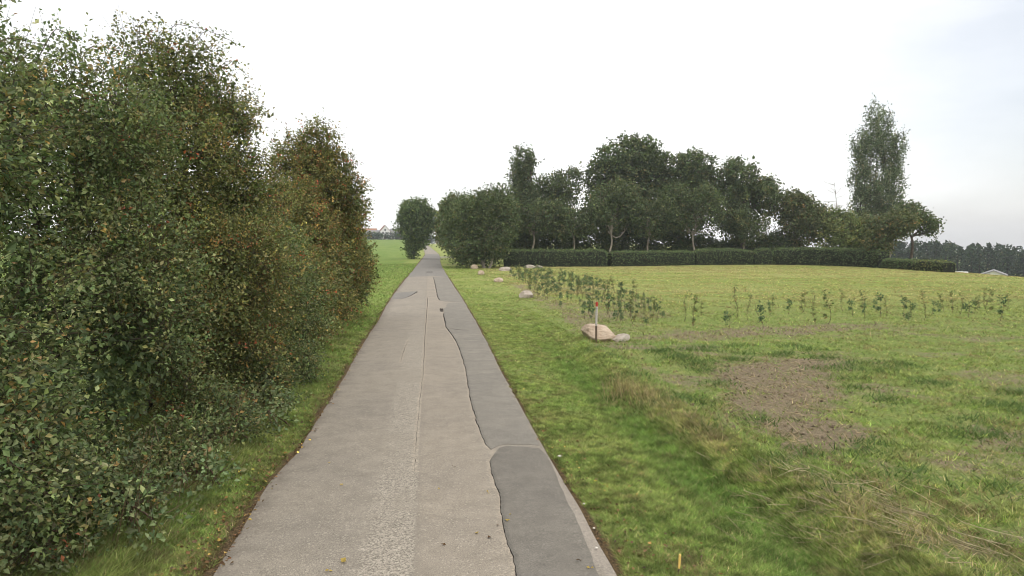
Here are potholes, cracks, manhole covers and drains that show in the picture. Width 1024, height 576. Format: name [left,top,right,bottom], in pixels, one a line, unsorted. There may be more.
crack [408,278,517,576]
